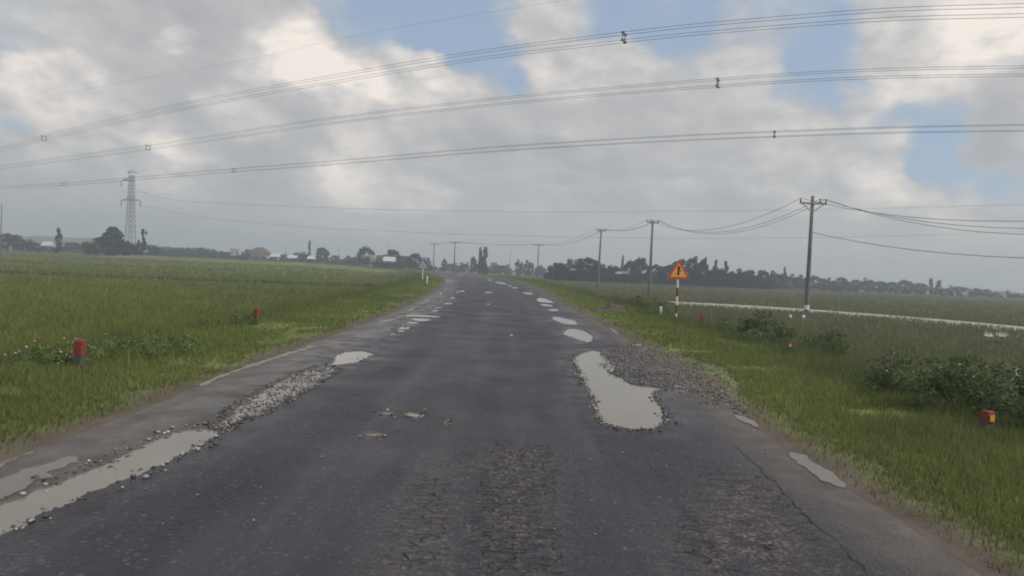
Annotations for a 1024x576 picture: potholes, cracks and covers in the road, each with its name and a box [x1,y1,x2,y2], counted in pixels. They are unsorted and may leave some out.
pothole [322,350,378,365]
crack [668,444,866,575]
pothole [561,327,595,343]
pothole [390,408,426,420]
pothole [552,316,577,325]
pothole [0,420,237,535]
crack [386,472,452,571]
crack [469,437,565,576]
pothole [202,364,342,430]
pothole [567,348,678,433]
